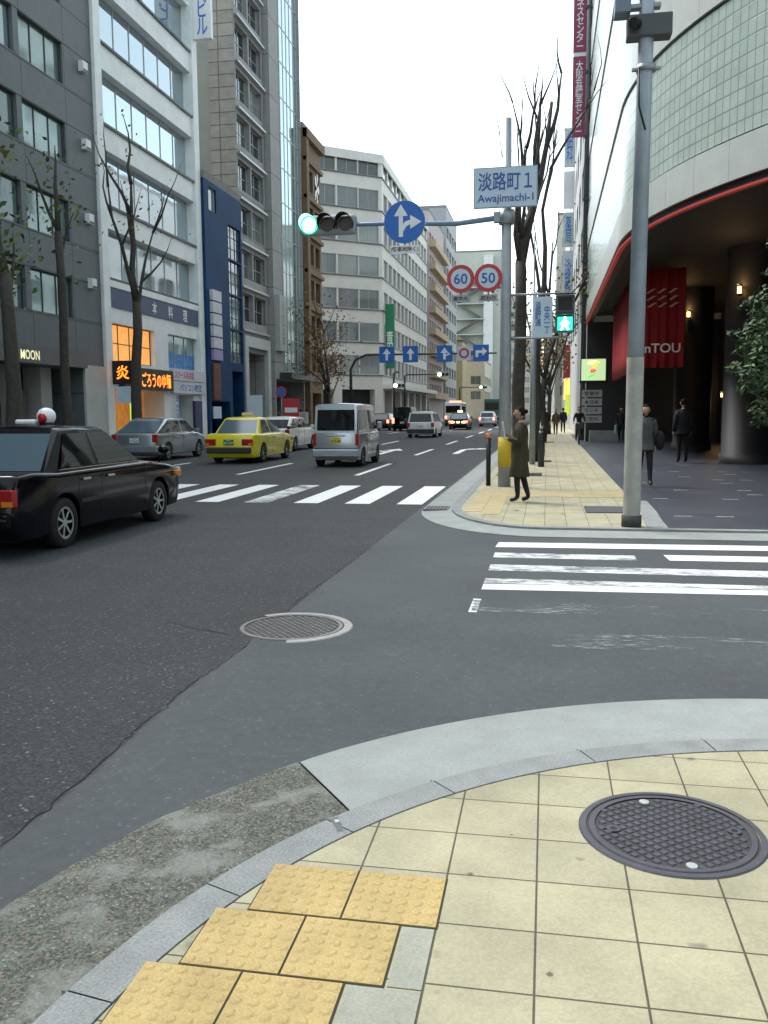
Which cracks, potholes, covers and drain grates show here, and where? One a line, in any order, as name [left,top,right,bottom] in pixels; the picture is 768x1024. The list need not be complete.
manhole cover [239,613,353,643]
manhole cover [578,792,768,880]
